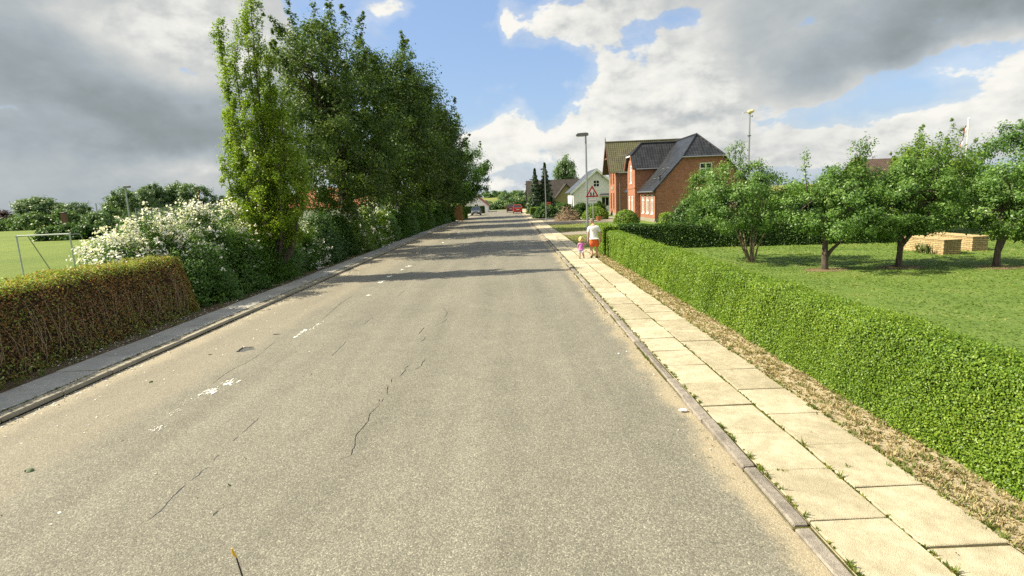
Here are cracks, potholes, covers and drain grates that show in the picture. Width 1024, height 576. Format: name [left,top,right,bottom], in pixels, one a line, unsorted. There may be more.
crack [348,360,425,457]
